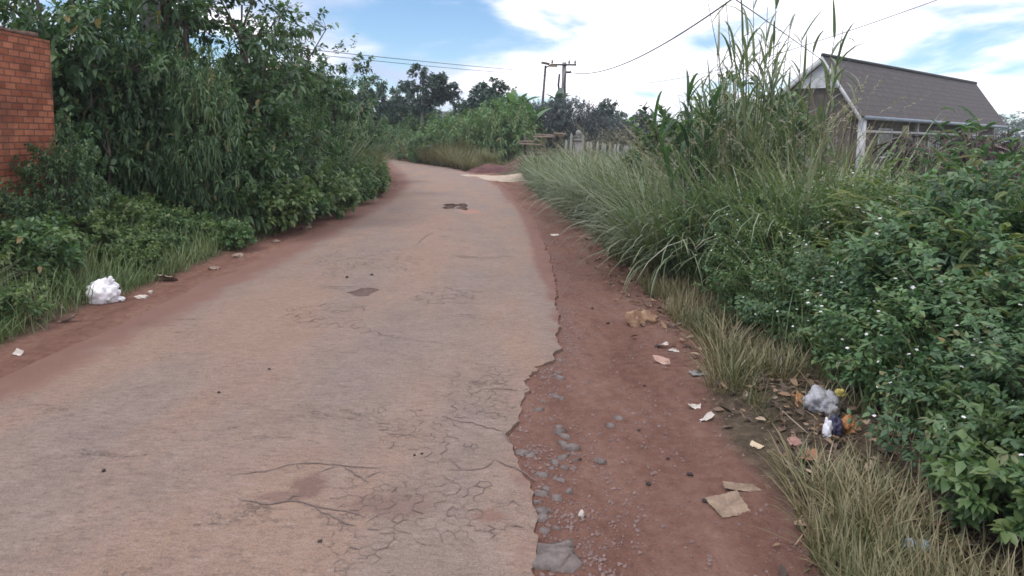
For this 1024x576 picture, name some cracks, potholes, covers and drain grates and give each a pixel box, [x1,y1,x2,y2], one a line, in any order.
pothole [443,203,468,211]
crack [234,362,537,571]
pothole [347,288,379,296]
